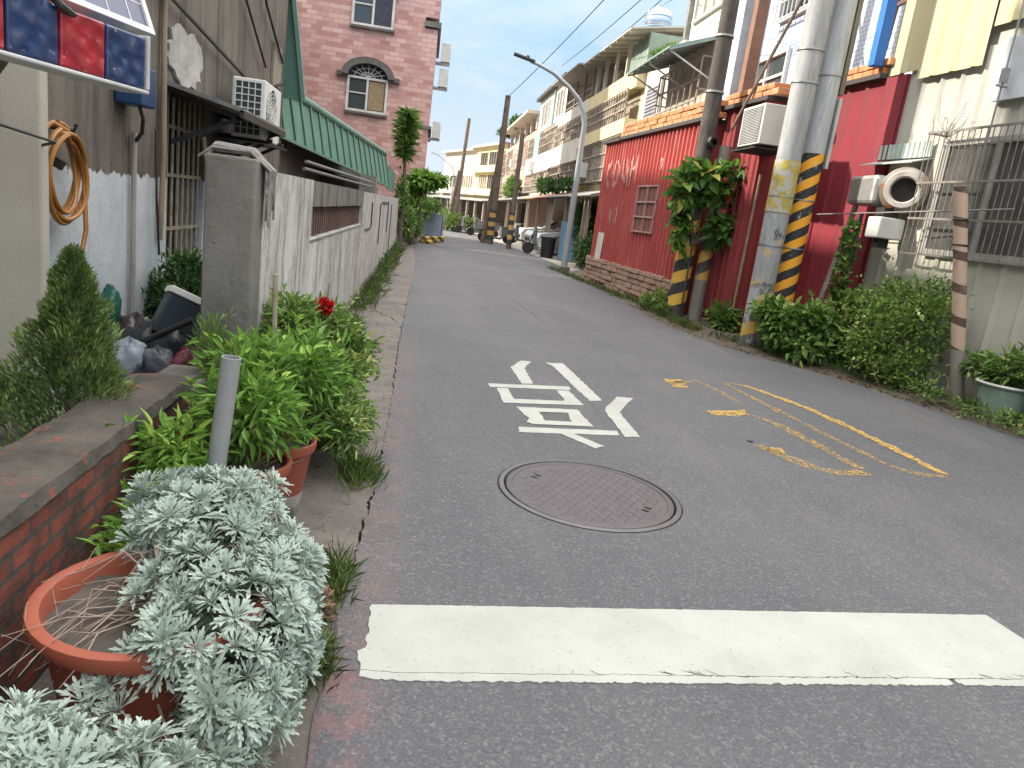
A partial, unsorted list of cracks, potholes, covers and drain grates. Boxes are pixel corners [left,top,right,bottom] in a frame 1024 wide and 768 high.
manhole cover [498,460,682,533]
crack [354,492,374,563]
crack [534,670,1023,680]
